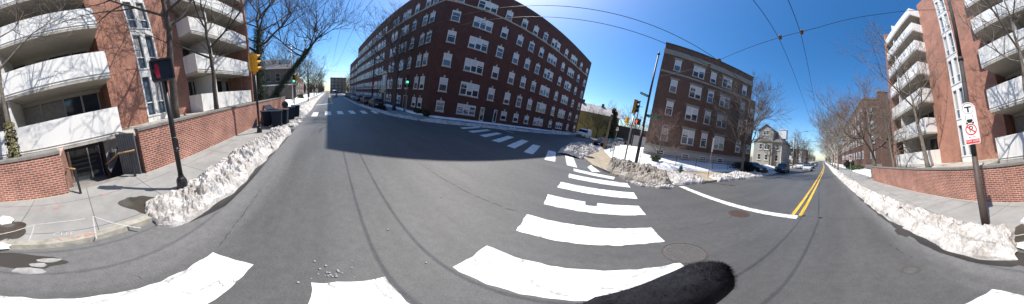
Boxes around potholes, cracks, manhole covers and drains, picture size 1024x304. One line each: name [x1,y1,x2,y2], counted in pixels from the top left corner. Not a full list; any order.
manhole cover [661,243,708,264]
utility cover [900,266,921,275]
